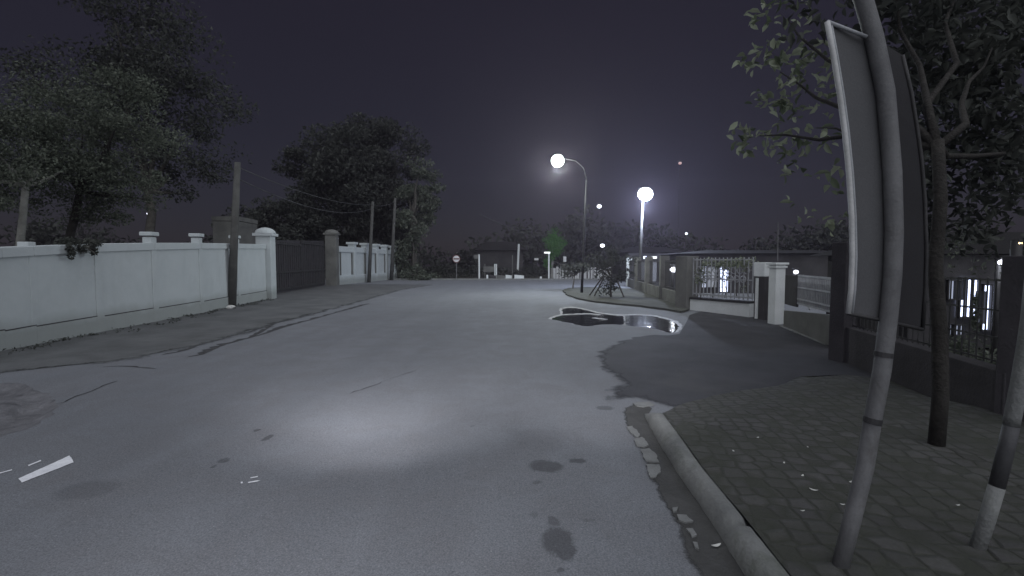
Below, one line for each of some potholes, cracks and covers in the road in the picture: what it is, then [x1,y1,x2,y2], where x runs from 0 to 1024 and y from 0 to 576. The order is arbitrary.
pothole [548,307,683,333]
